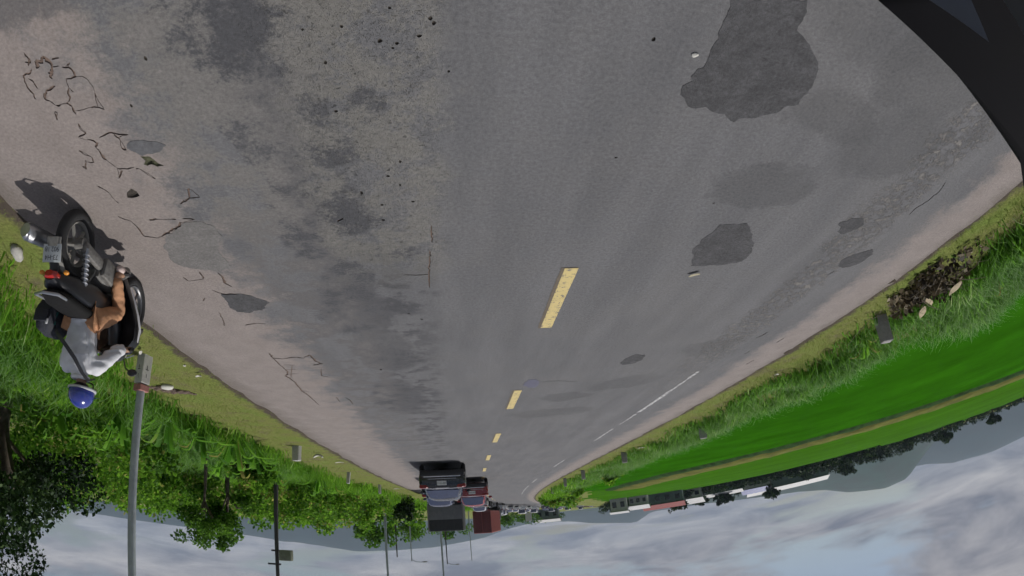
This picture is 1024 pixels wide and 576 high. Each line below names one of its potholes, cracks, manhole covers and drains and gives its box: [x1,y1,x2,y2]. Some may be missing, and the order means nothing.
crack [23,54,156,202]
crack [269,353,326,405]
crack [183,272,261,326]
crack [120,188,199,237]
